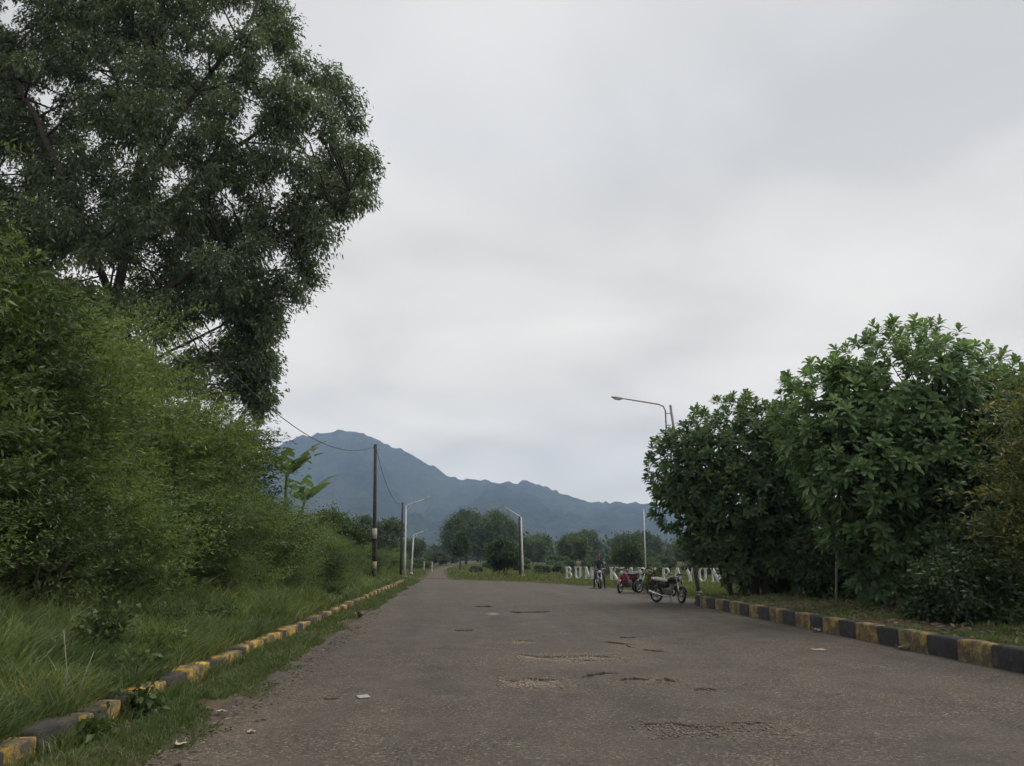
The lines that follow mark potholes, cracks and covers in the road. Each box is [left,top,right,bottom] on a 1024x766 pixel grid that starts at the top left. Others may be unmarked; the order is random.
pothole [494,676,574,689]
pothole [655,677,689,685]
pothole [630,720,753,740]
pothole [614,677,660,685]
pothole [515,653,633,663]
